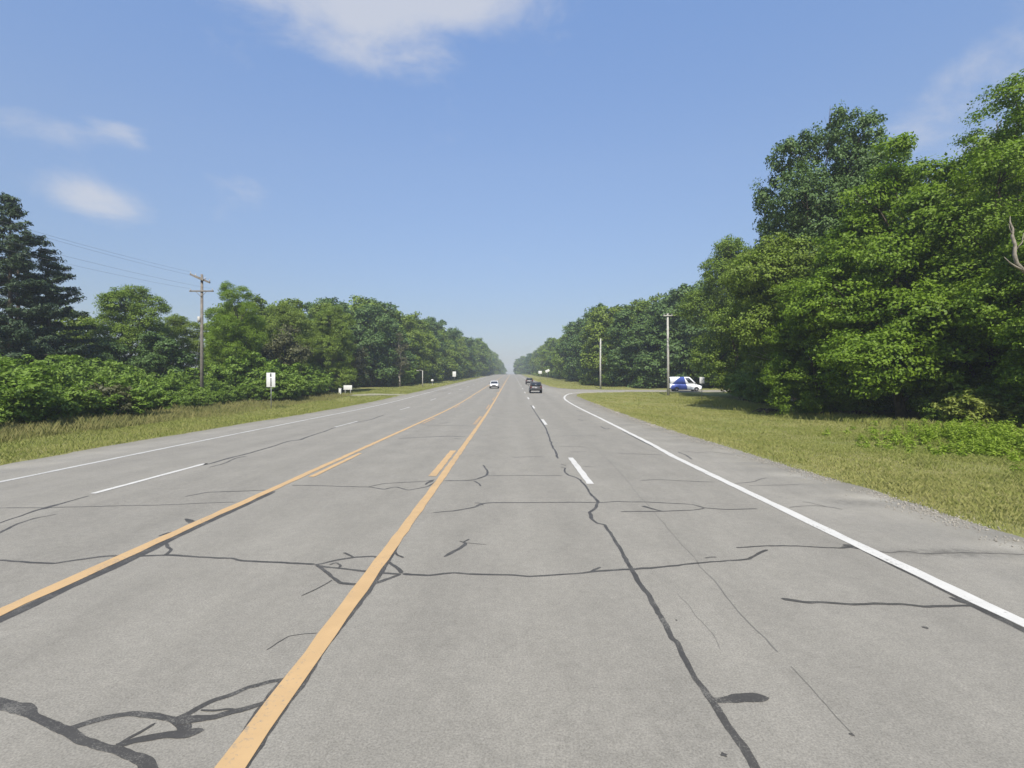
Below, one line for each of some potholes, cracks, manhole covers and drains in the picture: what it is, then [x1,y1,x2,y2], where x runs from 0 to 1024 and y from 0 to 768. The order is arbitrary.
crack [300,446,852,733]
crack [0,490,258,533]
